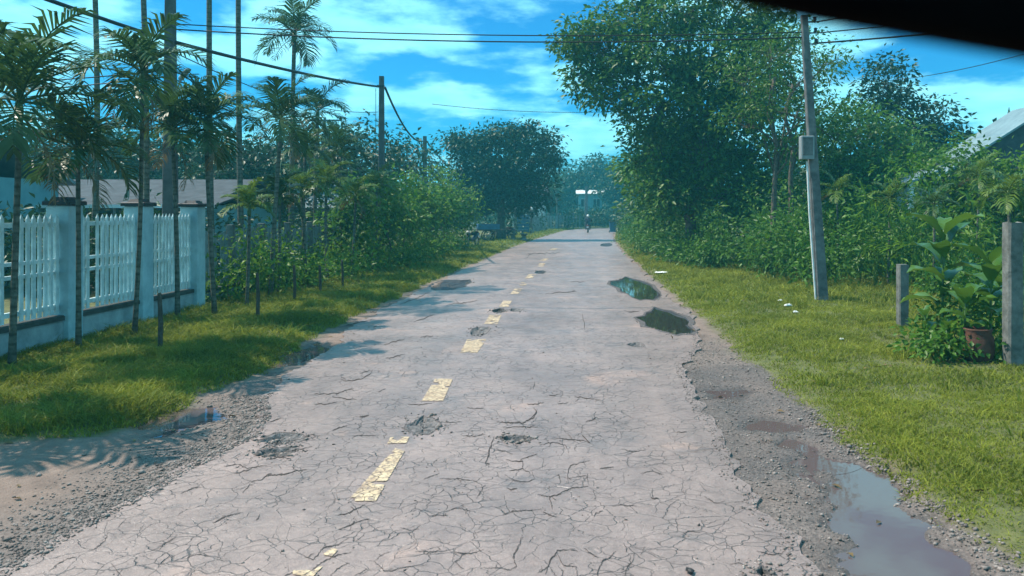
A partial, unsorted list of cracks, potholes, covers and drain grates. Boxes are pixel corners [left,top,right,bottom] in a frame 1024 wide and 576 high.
pothole [428,279,472,290]
crack [538,542,645,576]
crack [316,292,434,417]
crack [284,503,521,576]
pothole [470,327,490,336]
crack [427,383,640,517]
pothole [403,415,443,435]
pothole [607,276,662,301]
crack [227,418,375,492]
pothole [633,307,698,336]
